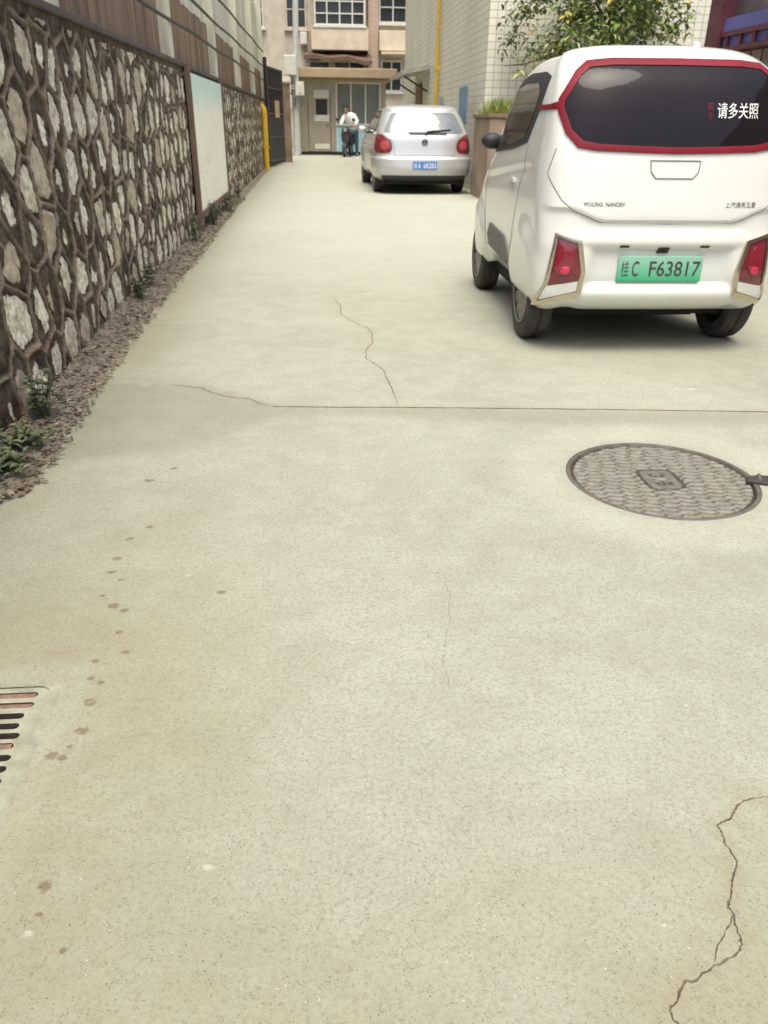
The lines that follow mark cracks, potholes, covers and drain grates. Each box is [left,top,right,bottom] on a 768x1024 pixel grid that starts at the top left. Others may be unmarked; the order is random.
manhole cover [566,443,768,521]
crack [669,796,768,1024]
crack [334,298,397,401]
drain grate [0,681,63,827]
